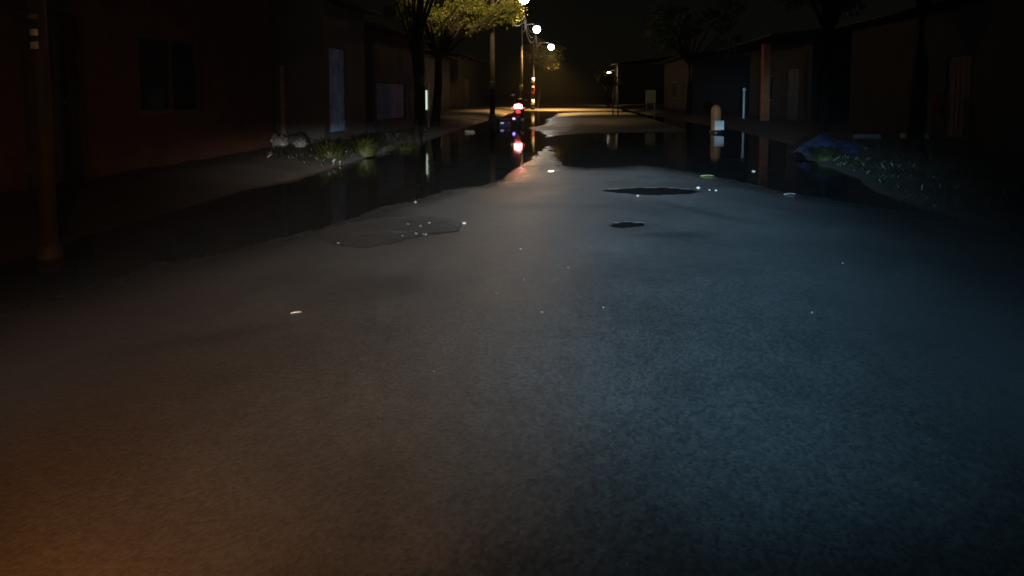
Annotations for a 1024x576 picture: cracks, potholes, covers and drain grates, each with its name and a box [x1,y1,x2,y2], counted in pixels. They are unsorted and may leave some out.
pothole [602,187,703,195]
